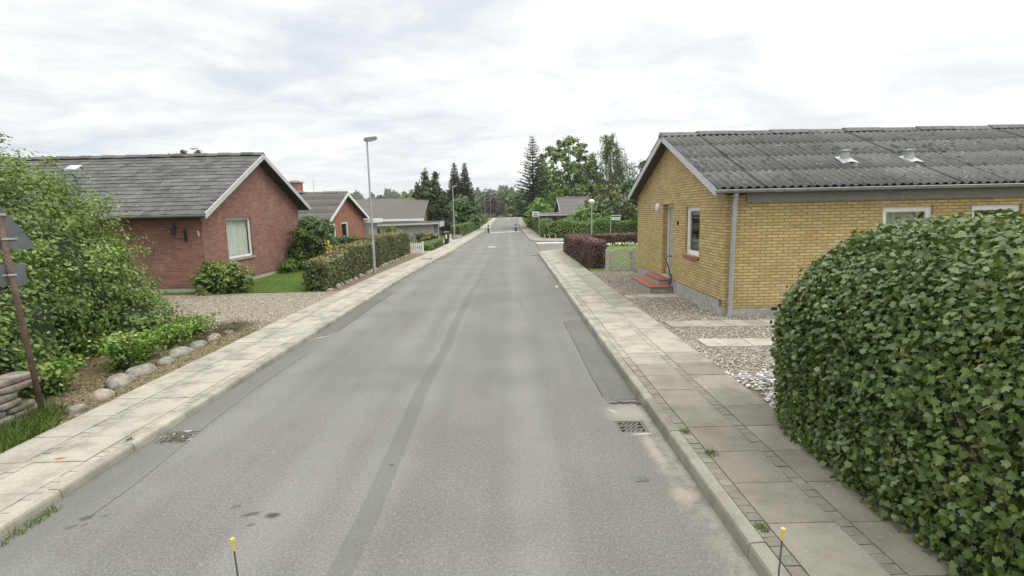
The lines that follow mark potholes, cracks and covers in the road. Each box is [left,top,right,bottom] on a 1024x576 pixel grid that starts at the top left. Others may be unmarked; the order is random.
drain grate [155,431,200,444]
drain grate [614,421,649,433]
